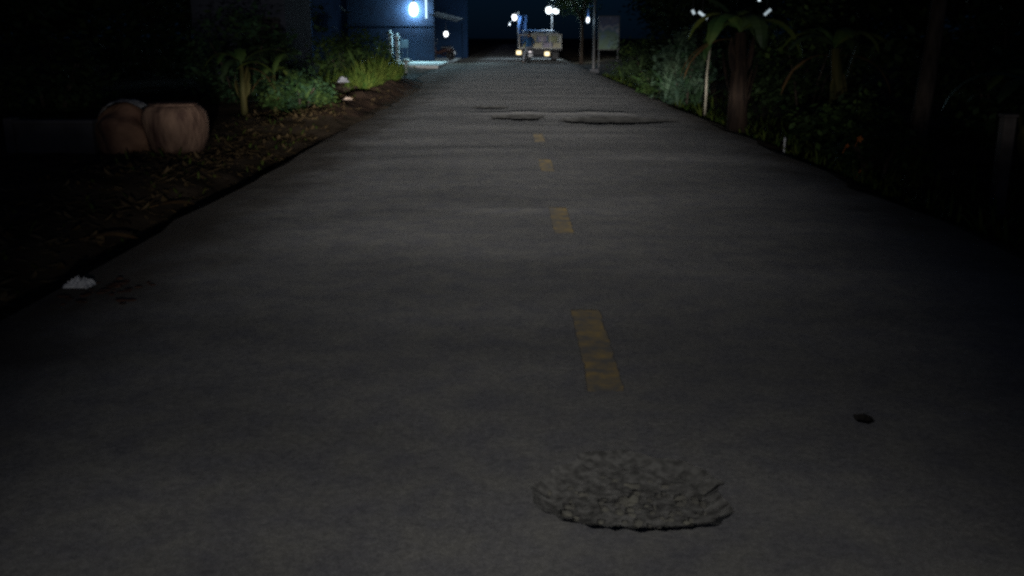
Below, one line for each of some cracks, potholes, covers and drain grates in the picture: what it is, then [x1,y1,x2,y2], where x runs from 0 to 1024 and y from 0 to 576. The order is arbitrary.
pothole [529,449,734,532]
pothole [853,413,875,424]
pothole [556,116,679,125]
